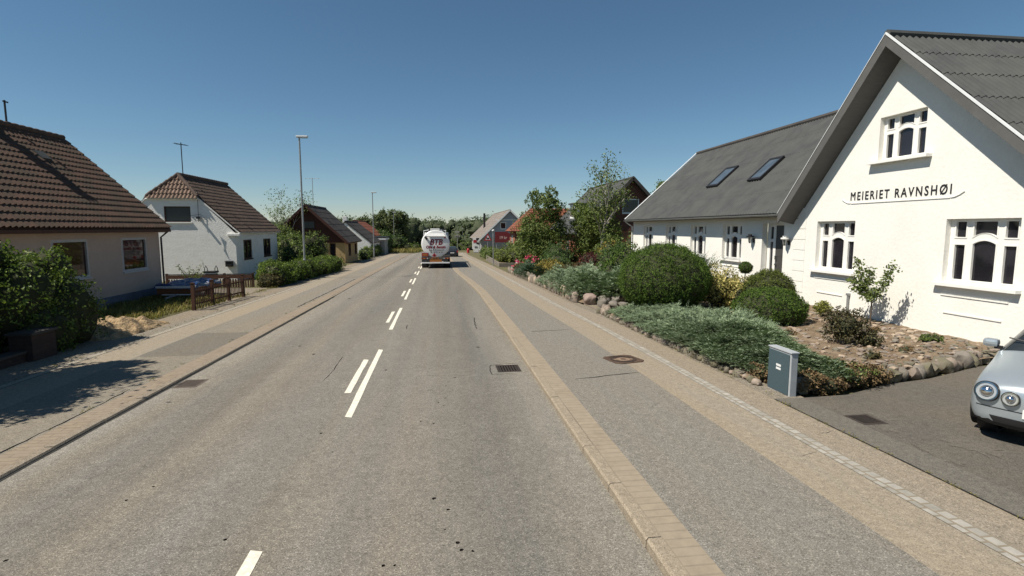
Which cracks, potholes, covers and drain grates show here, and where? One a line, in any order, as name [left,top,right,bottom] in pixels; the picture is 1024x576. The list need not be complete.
manhole cover [603,355,644,364]
drain grate [172,379,209,388]
